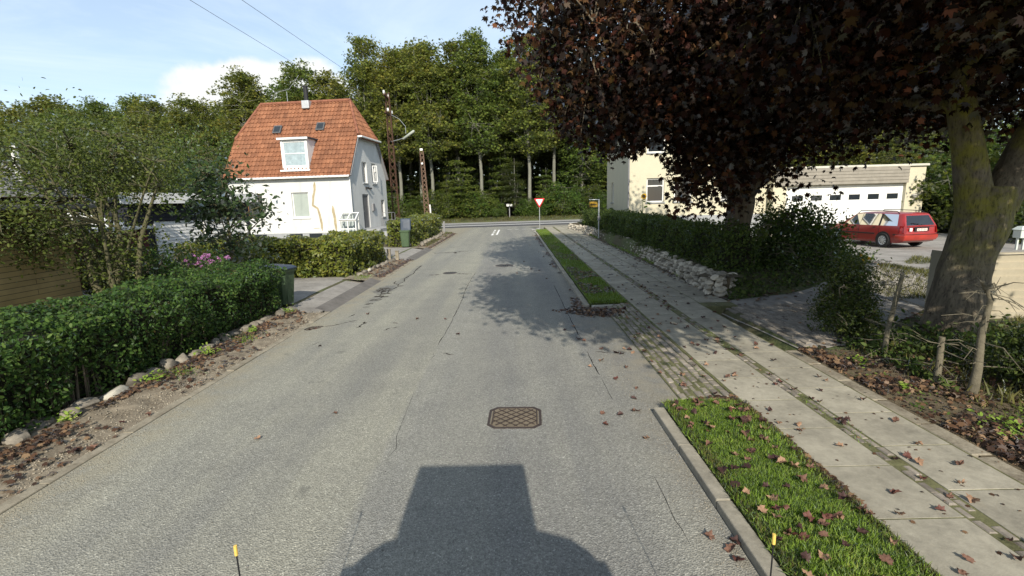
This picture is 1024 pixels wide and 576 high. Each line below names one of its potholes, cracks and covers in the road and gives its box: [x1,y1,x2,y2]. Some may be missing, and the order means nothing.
manhole cover [487,407,542,429]
crack [554,286,612,398]
crack [313,266,472,359]
